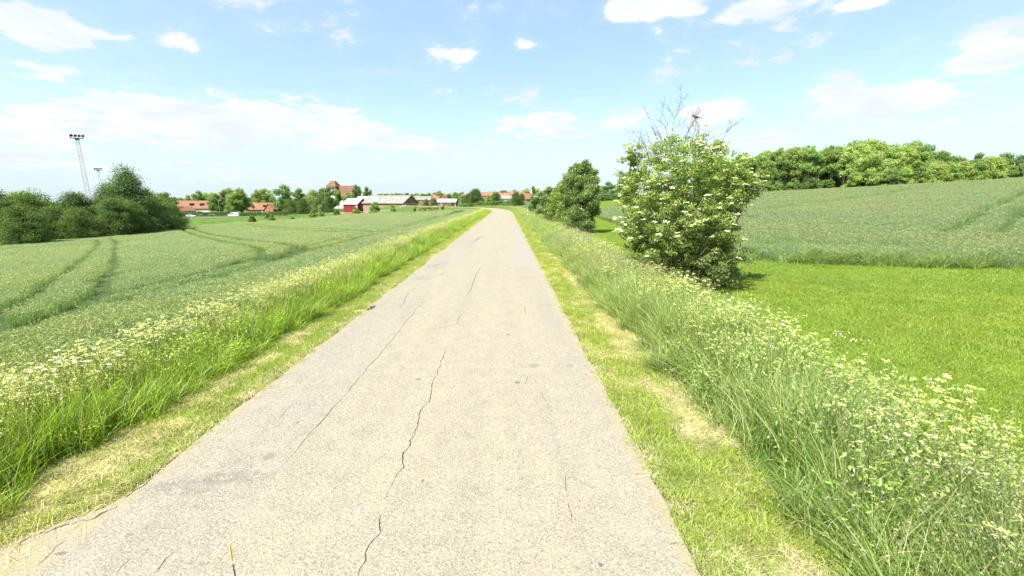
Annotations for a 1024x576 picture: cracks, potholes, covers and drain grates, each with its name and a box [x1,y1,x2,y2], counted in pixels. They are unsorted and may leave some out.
crack [358,347,447,576]
